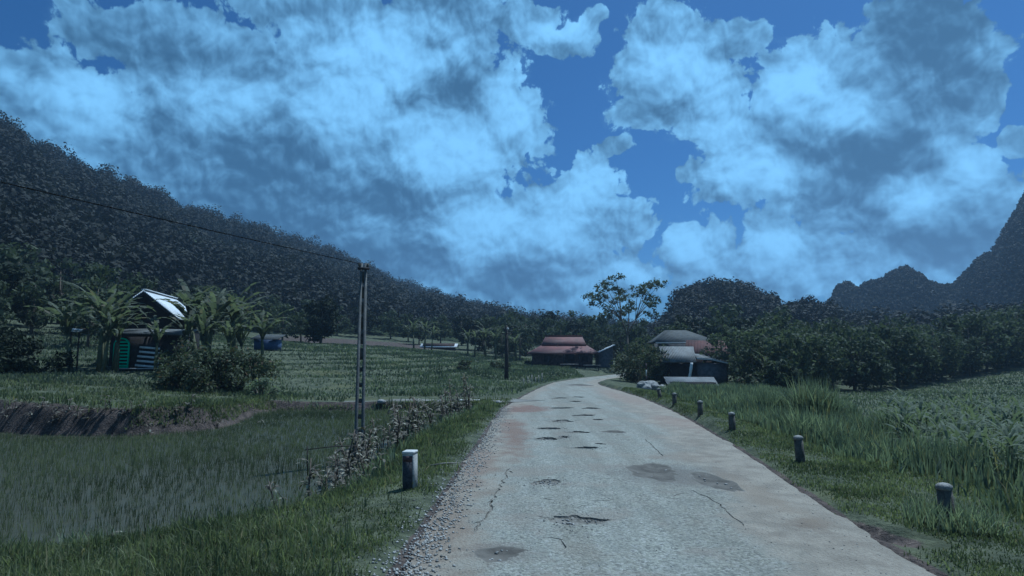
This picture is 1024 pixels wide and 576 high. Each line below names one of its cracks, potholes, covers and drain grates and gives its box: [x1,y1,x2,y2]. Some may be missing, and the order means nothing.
pothole [548,515,609,525]
pothole [474,546,527,562]
crack [673,490,744,526]
crack [473,468,513,533]
